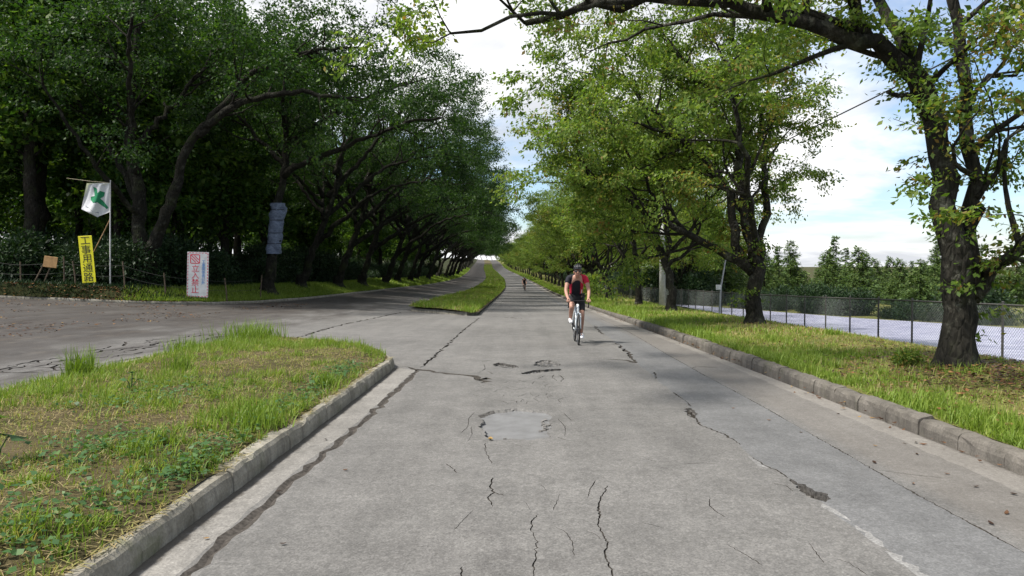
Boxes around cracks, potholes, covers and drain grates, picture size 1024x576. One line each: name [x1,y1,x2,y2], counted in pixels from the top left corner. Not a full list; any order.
crack [654,372,793,491]
pothole [478,408,555,440]
crack [594,326,637,363]
crack [405,365,571,529]
crack [526,480,613,576]
